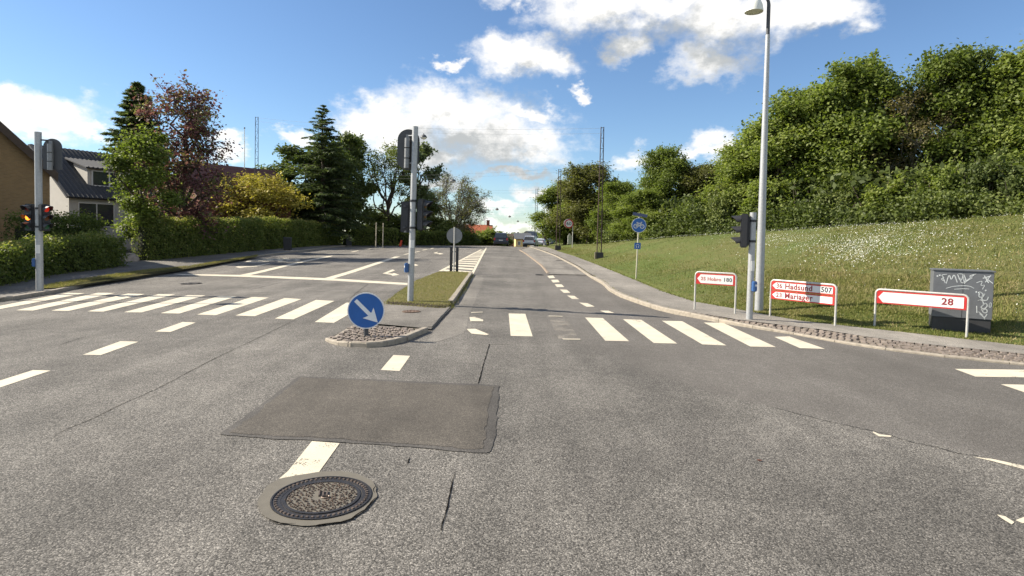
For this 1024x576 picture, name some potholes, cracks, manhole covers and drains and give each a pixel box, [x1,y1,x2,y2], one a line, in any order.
crack [441,471,456,530]
manhole cover [257,471,377,526]
crack [769,406,977,456]
